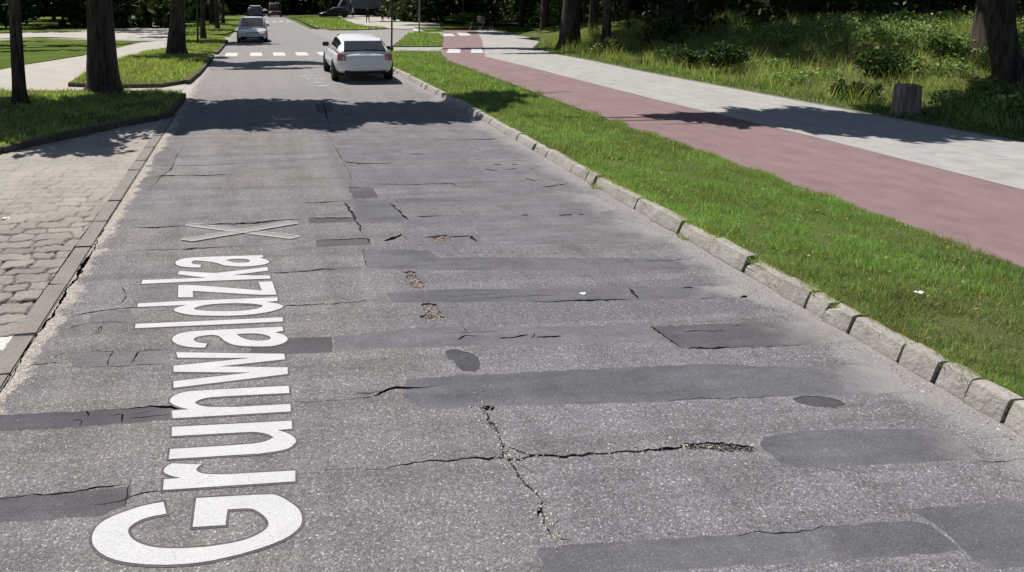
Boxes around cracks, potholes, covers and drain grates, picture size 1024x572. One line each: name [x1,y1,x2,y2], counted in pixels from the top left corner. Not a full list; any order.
pothole [420,303,444,322]
crack [136,187,479,251]
pothole [405,271,424,290]
crack [149,146,330,189]
crack [438,139,565,187]
crack [300,411,683,540]
crack [465,293,632,302]
crack [32,267,380,368]
